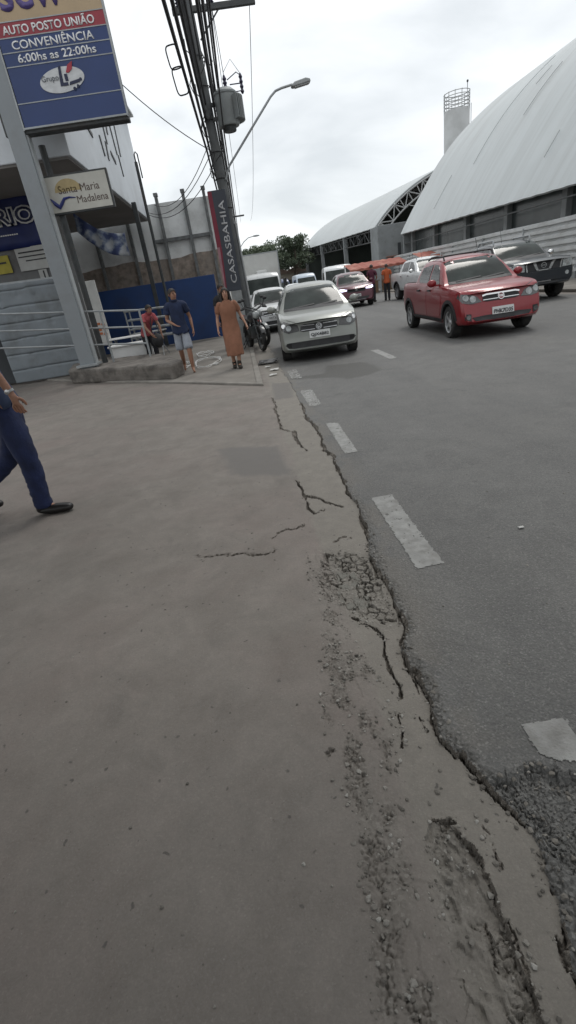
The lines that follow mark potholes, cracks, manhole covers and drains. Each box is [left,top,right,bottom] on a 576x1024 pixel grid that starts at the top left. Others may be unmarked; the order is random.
crack [197,398,576,1024]
pothole [423,820,540,1024]
